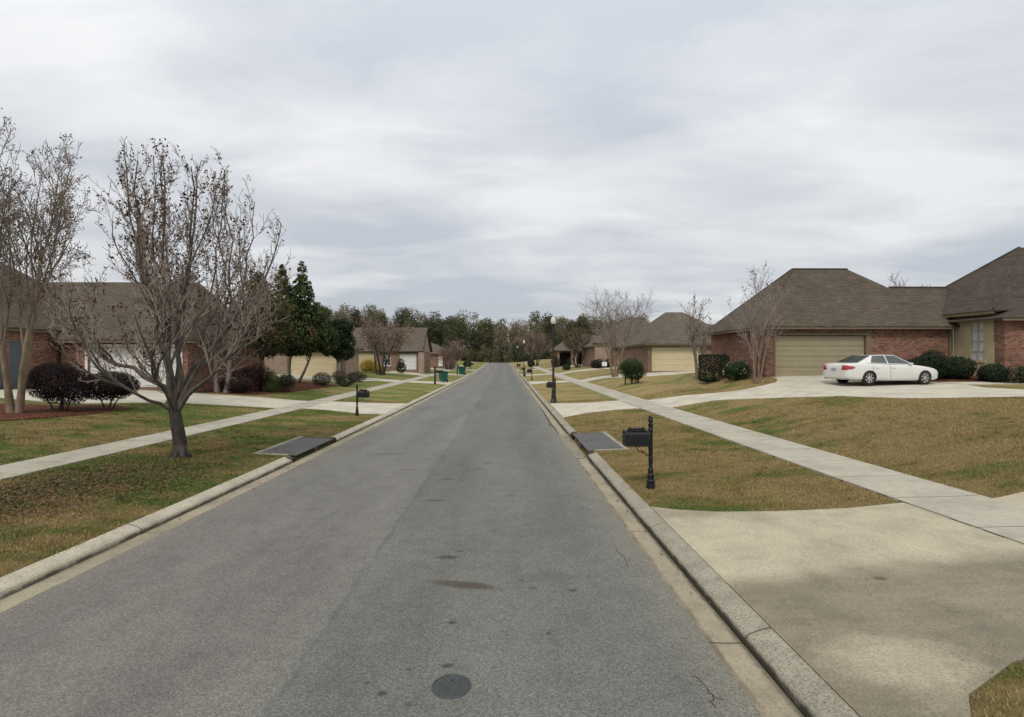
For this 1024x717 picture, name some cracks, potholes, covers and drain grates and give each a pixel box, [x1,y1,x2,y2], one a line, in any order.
manhole cover [431,674,471,699]
drain grate [570,431,630,458]
drain grate [251,436,336,463]
